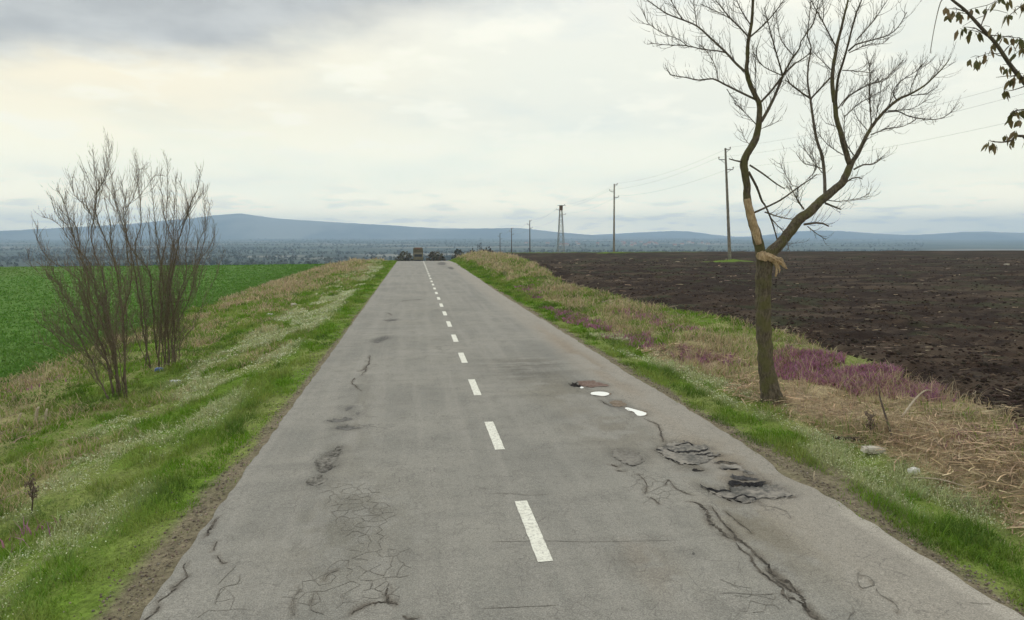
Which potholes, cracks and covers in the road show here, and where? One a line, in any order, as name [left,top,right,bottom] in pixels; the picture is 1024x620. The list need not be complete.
crack [144,563,188,620]
pothole [709,482,792,503]
crack [290,483,418,619]
crack [857,572,899,612]
pothole [314,445,343,472]
crack [611,419,820,620]
